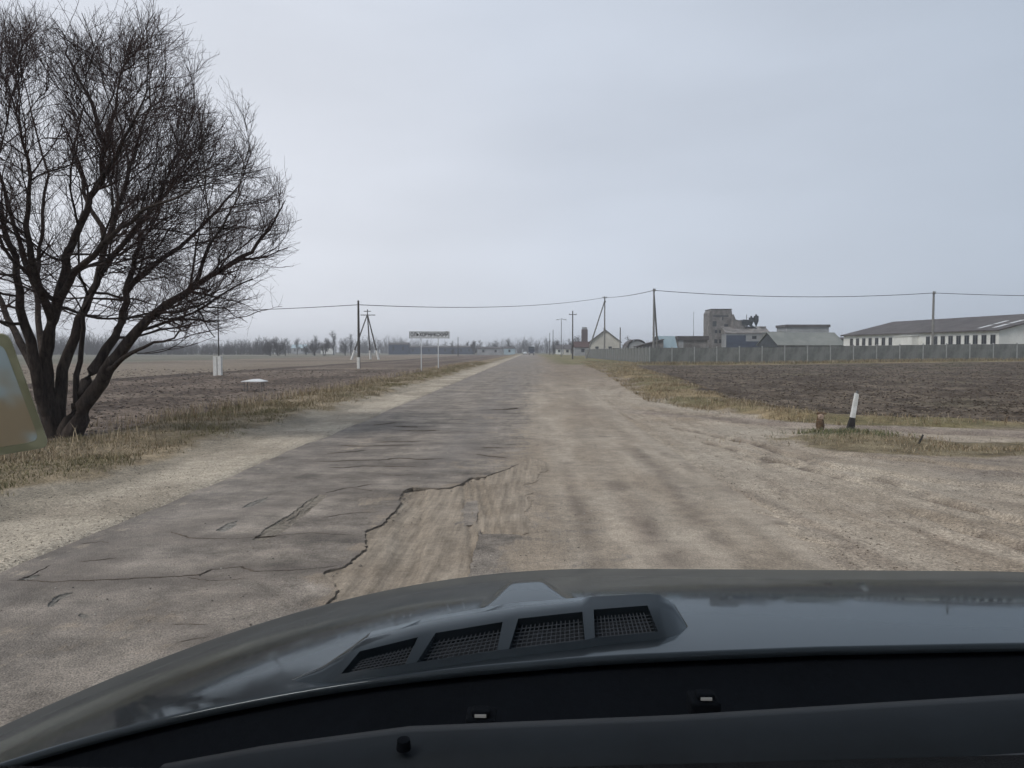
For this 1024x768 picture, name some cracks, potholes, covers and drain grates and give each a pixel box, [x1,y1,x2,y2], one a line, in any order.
crack [11,541,342,582]
crack [323,422,444,476]
pothole [323,457,550,605]
crack [168,512,366,539]
